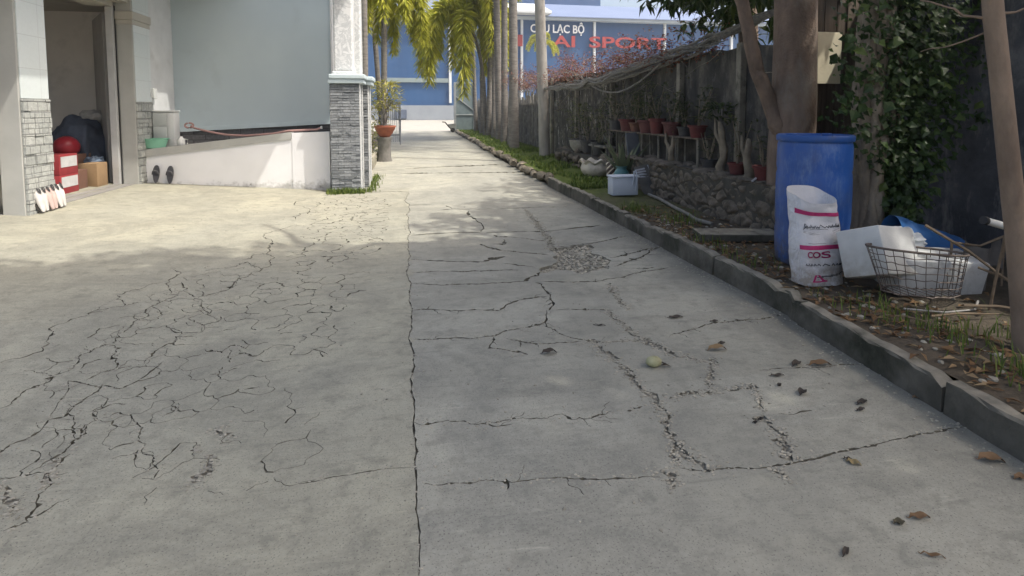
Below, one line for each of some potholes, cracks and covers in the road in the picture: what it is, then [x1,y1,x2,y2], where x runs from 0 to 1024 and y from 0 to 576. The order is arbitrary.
crack [413,200,963,495]
pothole [539,244,611,274]
crack [0,195,388,531]
